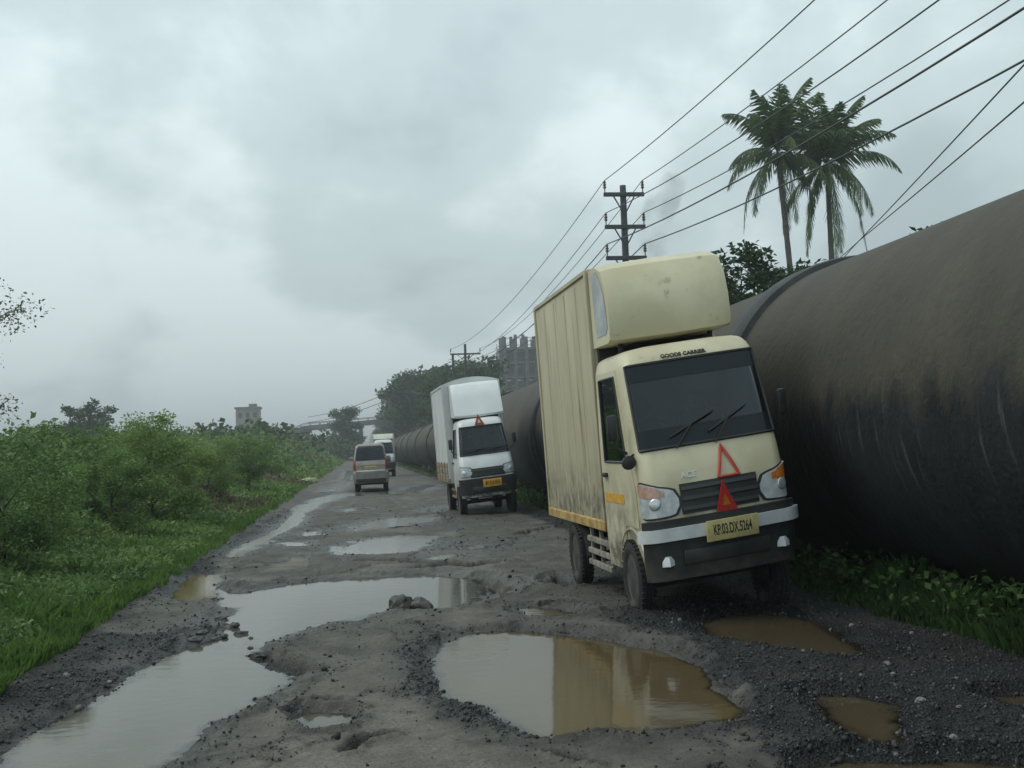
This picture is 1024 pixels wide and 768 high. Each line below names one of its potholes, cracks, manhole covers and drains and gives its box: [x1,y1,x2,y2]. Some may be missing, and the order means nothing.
pothole [156,567,231,602]
pothole [214,492,366,557]
pothole [277,697,369,728]
pothole [0,622,316,768]
pothole [673,603,894,655]
pothole [197,567,500,651]
pothole [310,535,454,557]
pothole [781,676,935,753]
pothole [408,620,779,740]
